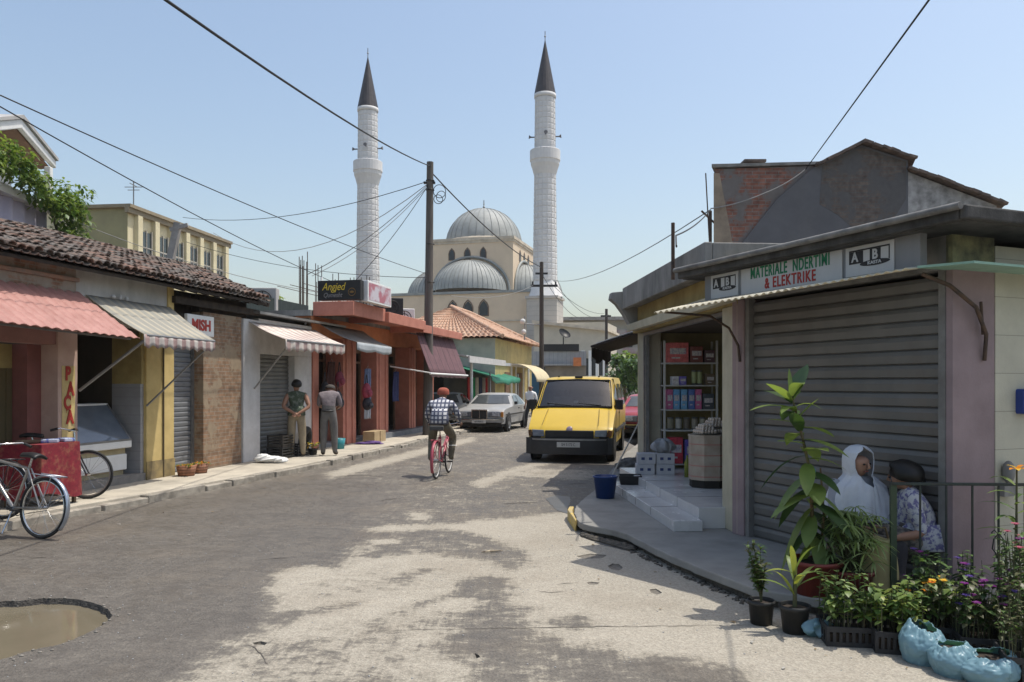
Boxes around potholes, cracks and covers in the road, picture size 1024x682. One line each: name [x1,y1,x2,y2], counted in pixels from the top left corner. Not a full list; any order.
pothole [0,589,140,661]
